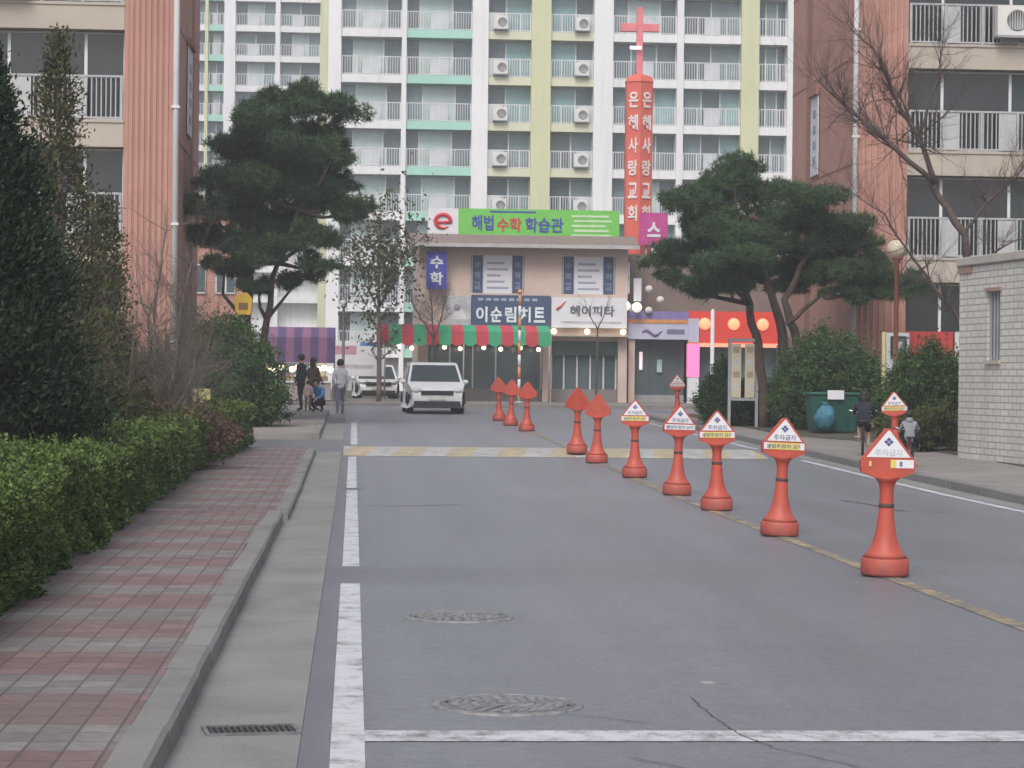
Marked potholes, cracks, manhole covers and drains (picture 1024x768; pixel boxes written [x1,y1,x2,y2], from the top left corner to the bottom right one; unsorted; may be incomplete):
drain grate [201,723,302,737]
manhole cover [402,610,514,623]
crack [691,697,865,768]
manhole cover [431,693,584,717]
